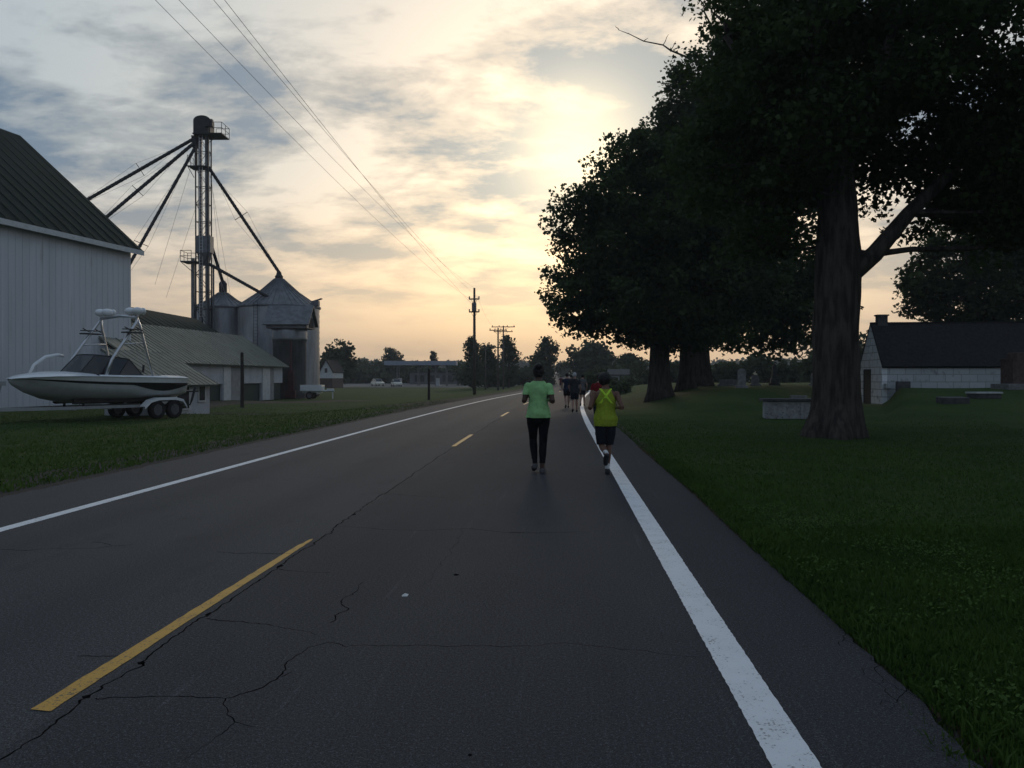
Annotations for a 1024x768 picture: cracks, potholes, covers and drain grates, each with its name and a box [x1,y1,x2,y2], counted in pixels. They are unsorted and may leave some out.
crack [838,629,926,715]
crack [0,419,698,760]
